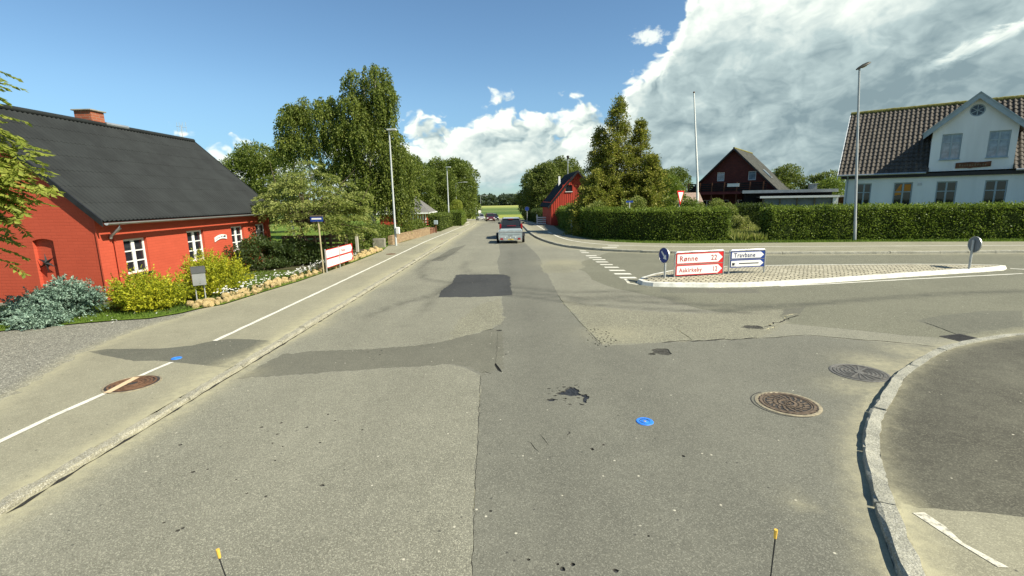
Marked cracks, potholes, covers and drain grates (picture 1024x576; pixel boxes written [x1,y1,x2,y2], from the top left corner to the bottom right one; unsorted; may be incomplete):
crack [663,314,798,343]
manhole cover [751,391,823,418]
manhole cover [101,375,162,394]
